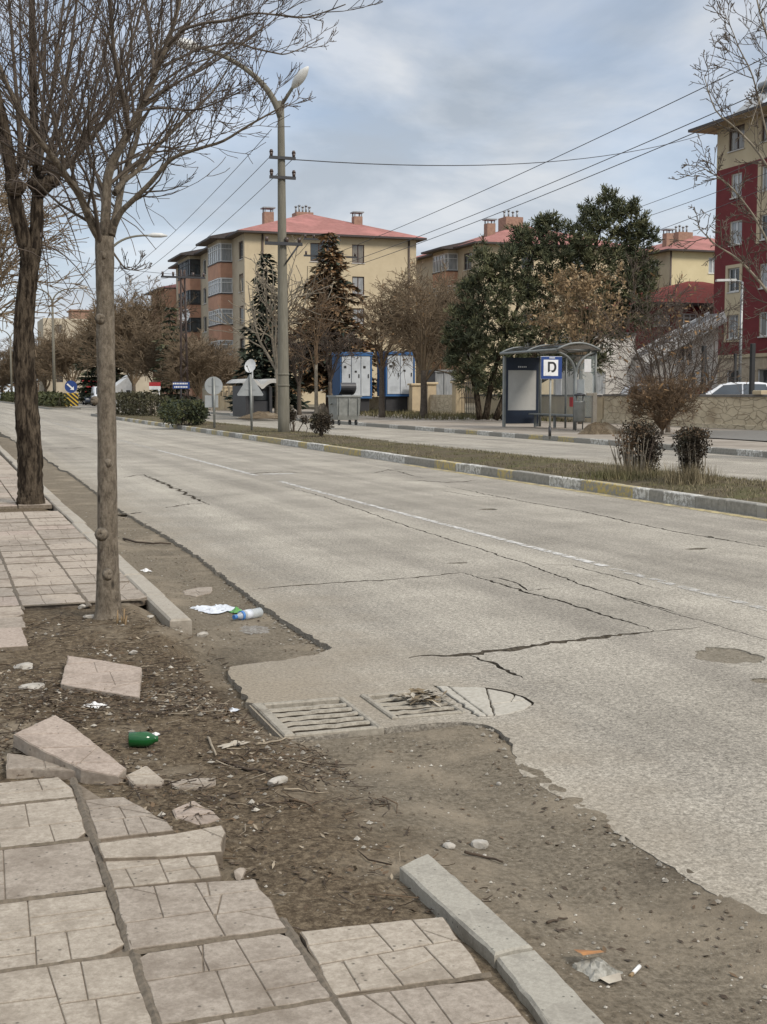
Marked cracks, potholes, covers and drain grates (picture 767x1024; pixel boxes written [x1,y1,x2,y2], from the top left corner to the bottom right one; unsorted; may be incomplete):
drain grate [252,697,384,738]
crack [253,489,766,715]
drain grate [360,690,466,720]
crack [129,474,210,508]
